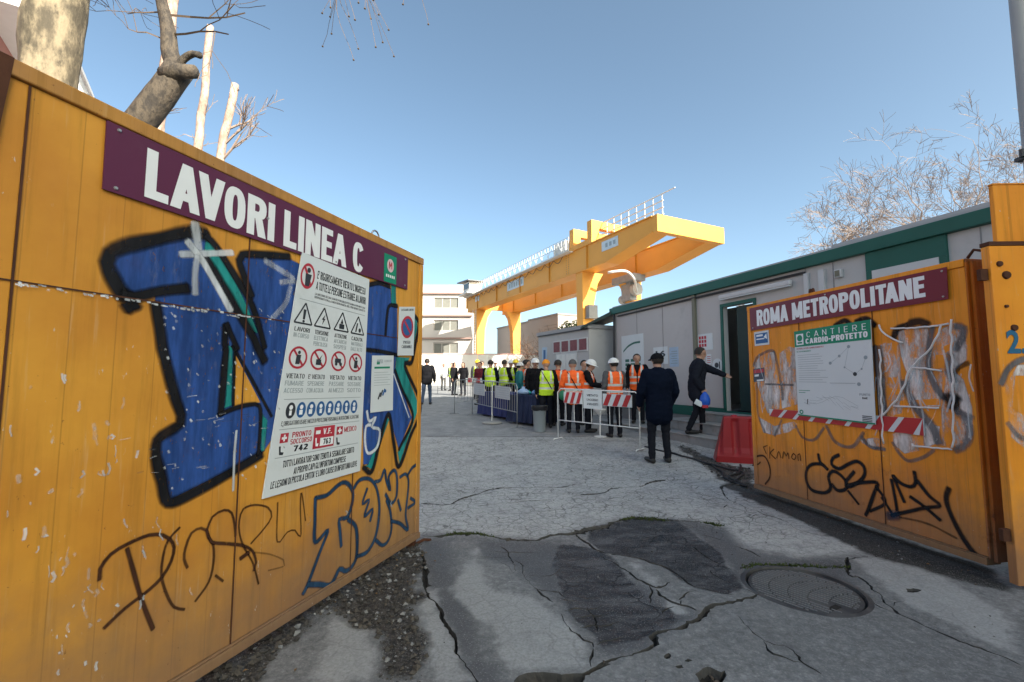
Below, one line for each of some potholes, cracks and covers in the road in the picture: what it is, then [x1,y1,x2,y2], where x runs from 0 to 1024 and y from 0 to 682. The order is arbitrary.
manhole cover [740,566,875,618]
crack [420,480,1020,682]
pothole [695,667,726,682]
